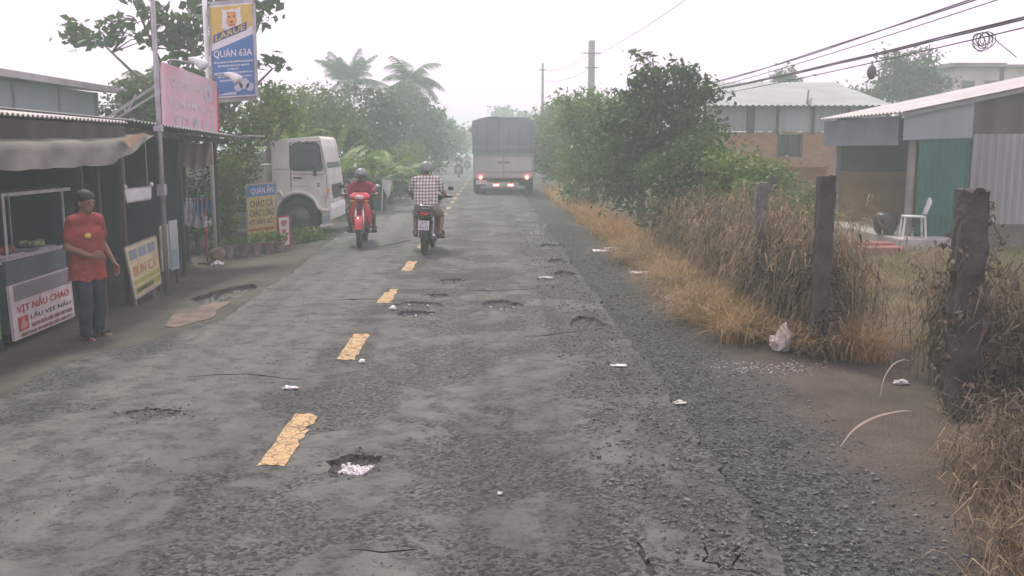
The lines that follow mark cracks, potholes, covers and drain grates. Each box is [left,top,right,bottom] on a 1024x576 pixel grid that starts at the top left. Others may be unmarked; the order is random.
pothole [123,408,183,419]
pothole [325,454,382,476]
pothole [570,316,609,328]
pothole [482,300,524,309]
crack [701,543,763,576]
crack [638,543,656,576]
pothole [189,284,257,304]
